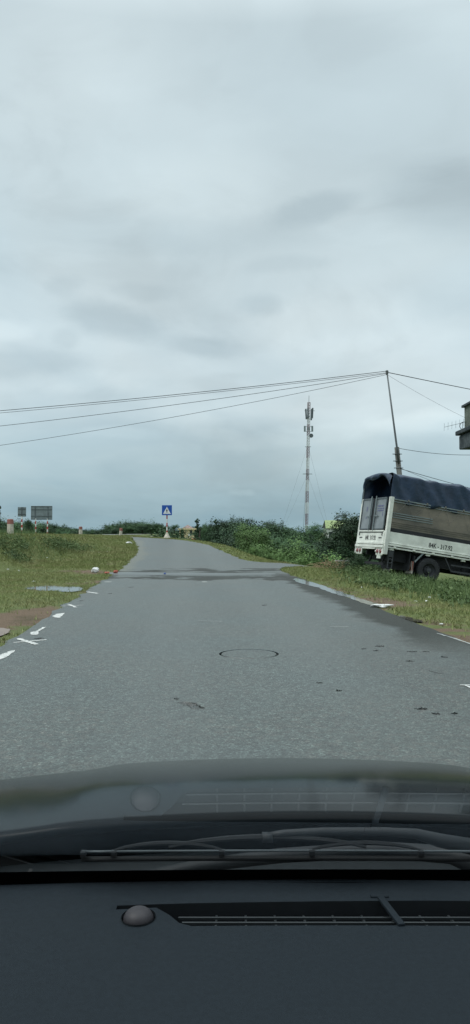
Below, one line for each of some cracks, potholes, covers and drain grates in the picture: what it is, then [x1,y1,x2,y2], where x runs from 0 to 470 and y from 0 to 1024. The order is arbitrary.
pothole [177,702,204,710]
manhole cover [219,649,279,659]
